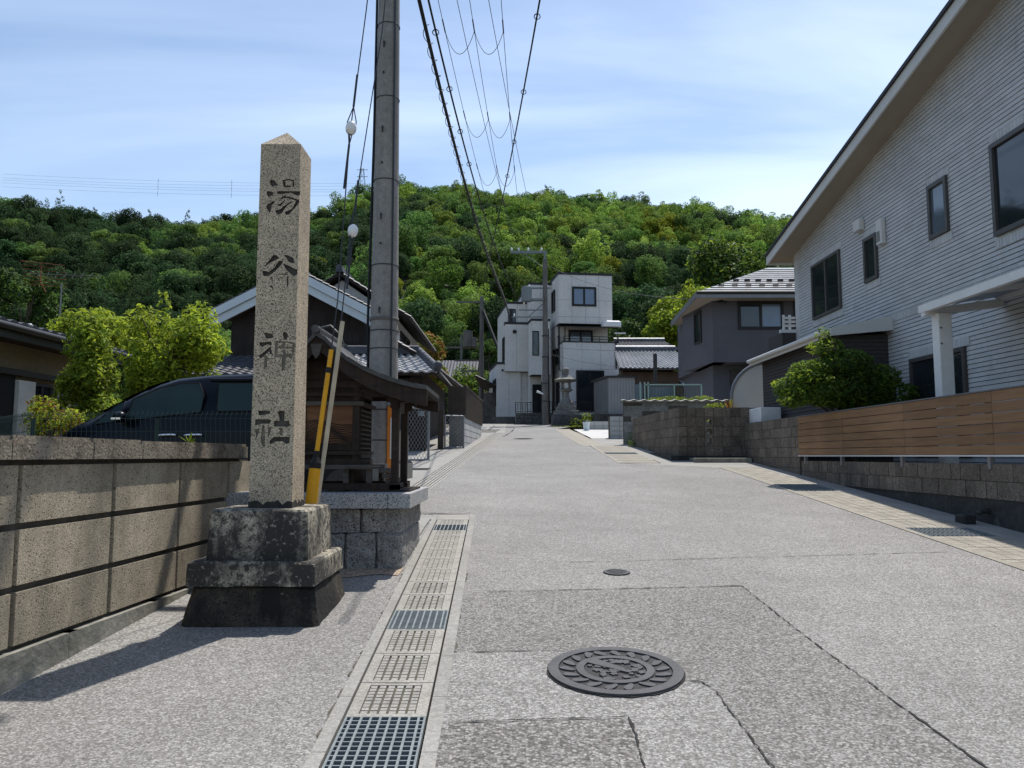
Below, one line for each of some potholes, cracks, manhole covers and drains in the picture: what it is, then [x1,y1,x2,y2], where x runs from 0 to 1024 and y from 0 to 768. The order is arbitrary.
drain grate [322,717,426,768]
manhole cover [547,647,686,698]
crack [691,680,775,768]
drain grate [387,610,449,631]
drain grate [907,528,996,537]
